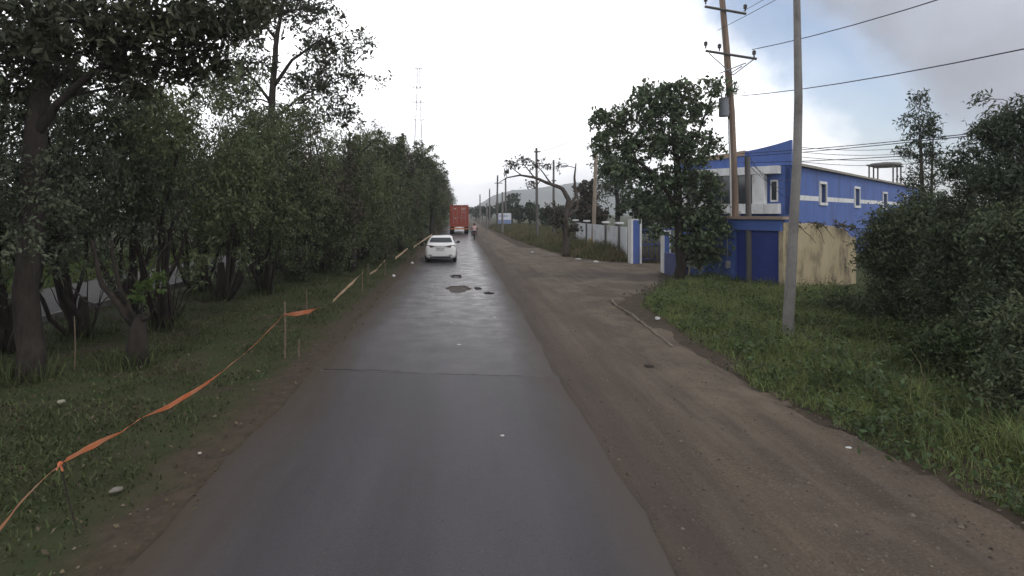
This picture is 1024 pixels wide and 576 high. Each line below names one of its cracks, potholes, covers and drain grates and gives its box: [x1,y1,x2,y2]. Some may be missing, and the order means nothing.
pothole [445,285,472,293]
